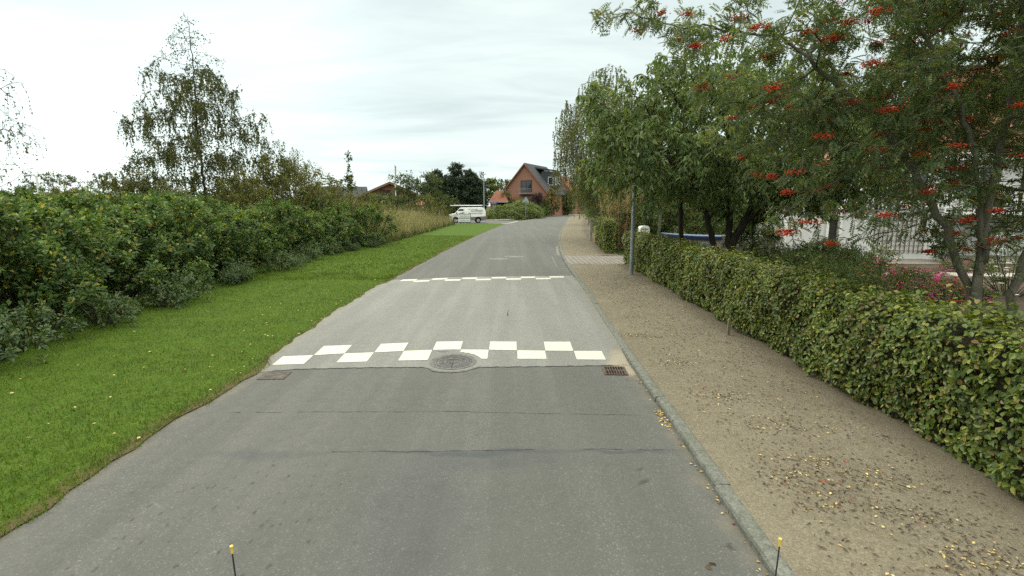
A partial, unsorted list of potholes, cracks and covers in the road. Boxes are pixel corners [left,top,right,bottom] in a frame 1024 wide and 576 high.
drain grate [602,366,628,375]
manhole cover [430,354,476,369]
